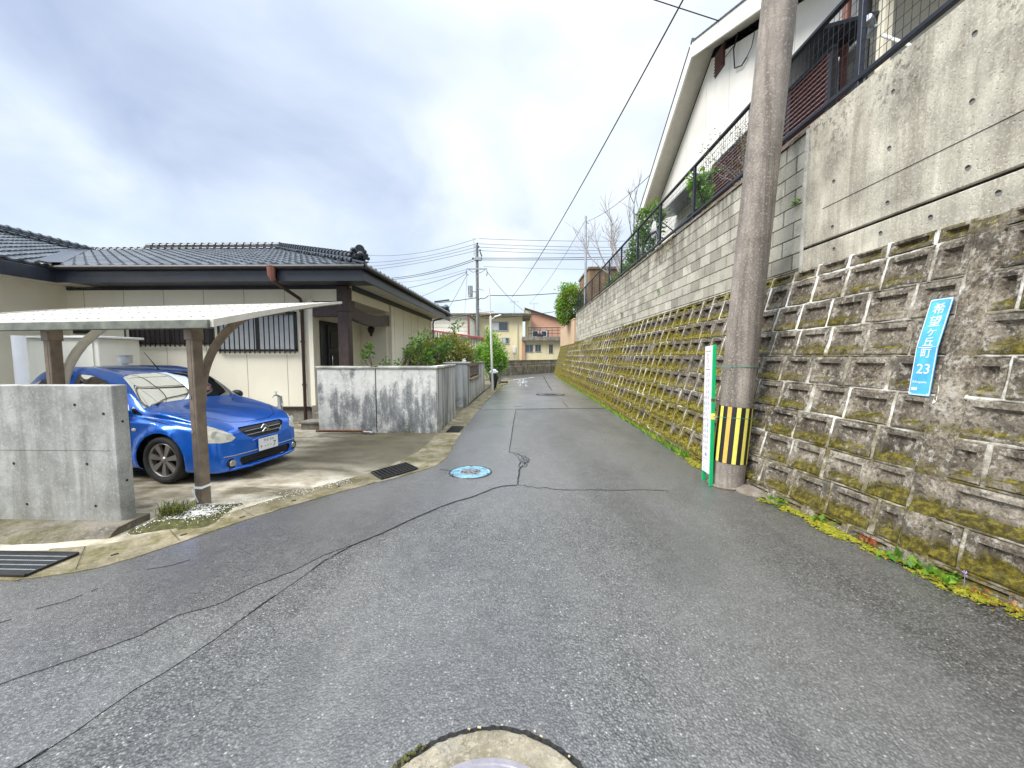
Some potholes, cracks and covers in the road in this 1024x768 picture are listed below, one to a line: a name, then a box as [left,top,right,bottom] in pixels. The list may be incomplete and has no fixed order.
crack [509,406,667,491]
manhole cover [449,466,492,479]
drain grate [371,462,418,479]
manhole cover [392,725,584,768]
drain grate [0,550,79,577]
crack [15,545,352,768]
